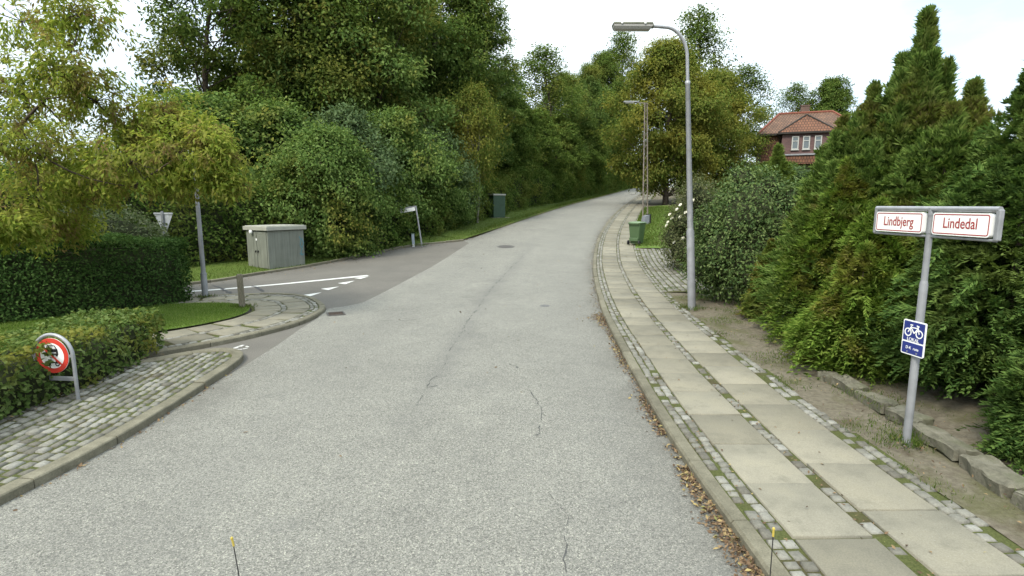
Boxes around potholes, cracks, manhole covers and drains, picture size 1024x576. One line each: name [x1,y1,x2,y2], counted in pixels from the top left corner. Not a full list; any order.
crack [549,493,569,570]
